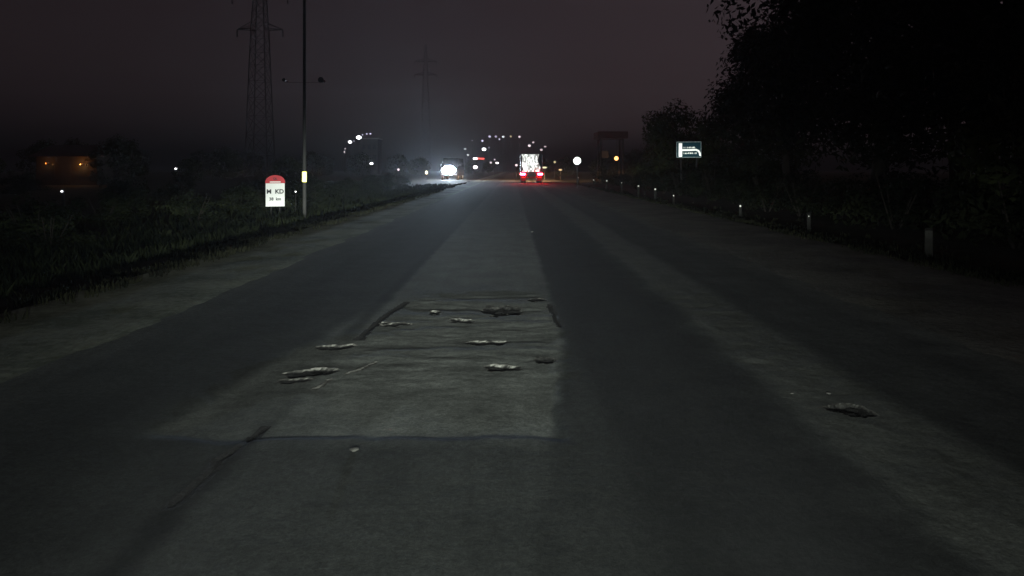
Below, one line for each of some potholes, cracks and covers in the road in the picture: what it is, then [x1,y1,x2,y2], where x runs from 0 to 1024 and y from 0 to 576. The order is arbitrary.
pothole [483,363,523,373]
pothole [478,305,525,318]
crack [311,361,378,390]
pothole [281,367,340,379]
pothole [822,403,880,418]
pothole [533,356,558,365]
crack [162,426,271,511]
pothole [315,343,357,351]
